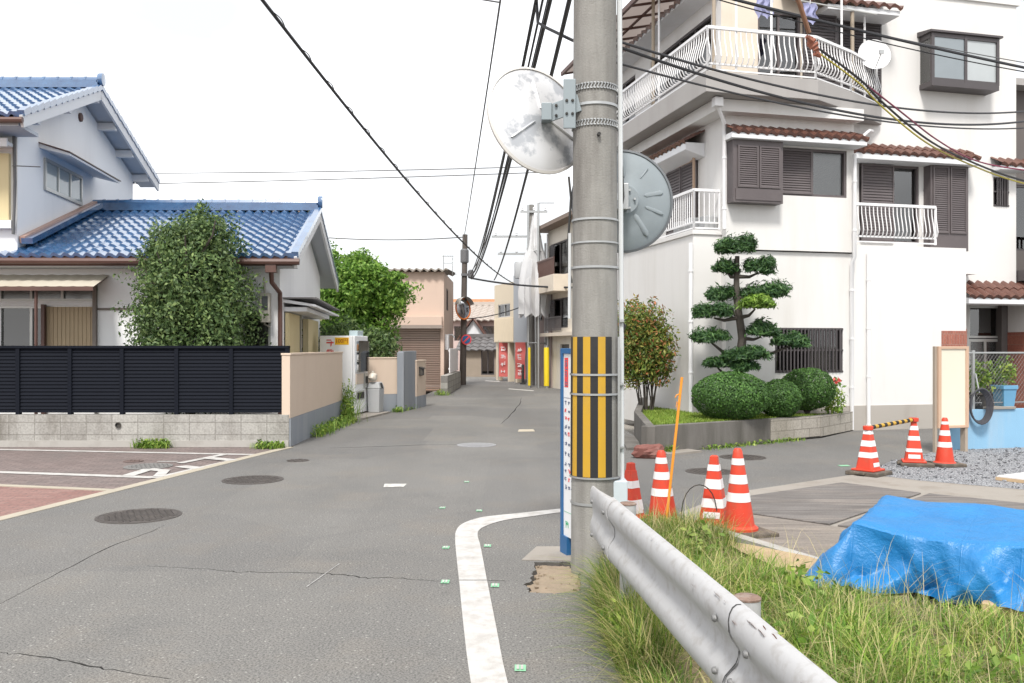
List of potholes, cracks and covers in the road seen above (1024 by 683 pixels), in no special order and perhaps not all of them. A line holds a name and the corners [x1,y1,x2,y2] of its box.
manhole cover [94,508,182,524]
manhole cover [221,475,284,485]
pothole [524,562,581,594]
crack [1,652,169,679]
crack [159,566,432,581]
crack [0,525,164,604]
